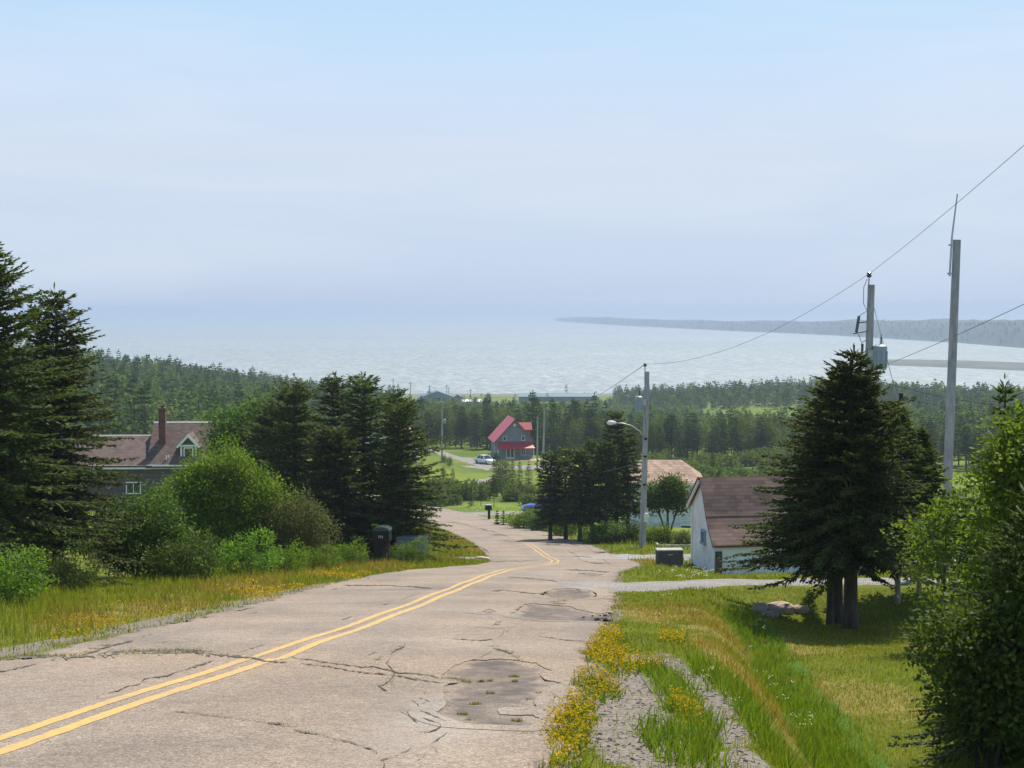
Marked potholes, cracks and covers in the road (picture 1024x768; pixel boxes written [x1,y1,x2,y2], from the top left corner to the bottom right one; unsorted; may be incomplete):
pothole [493,602,613,622]
crack [174,643,446,768]
crack [0,634,285,696]
pothole [401,657,574,731]
